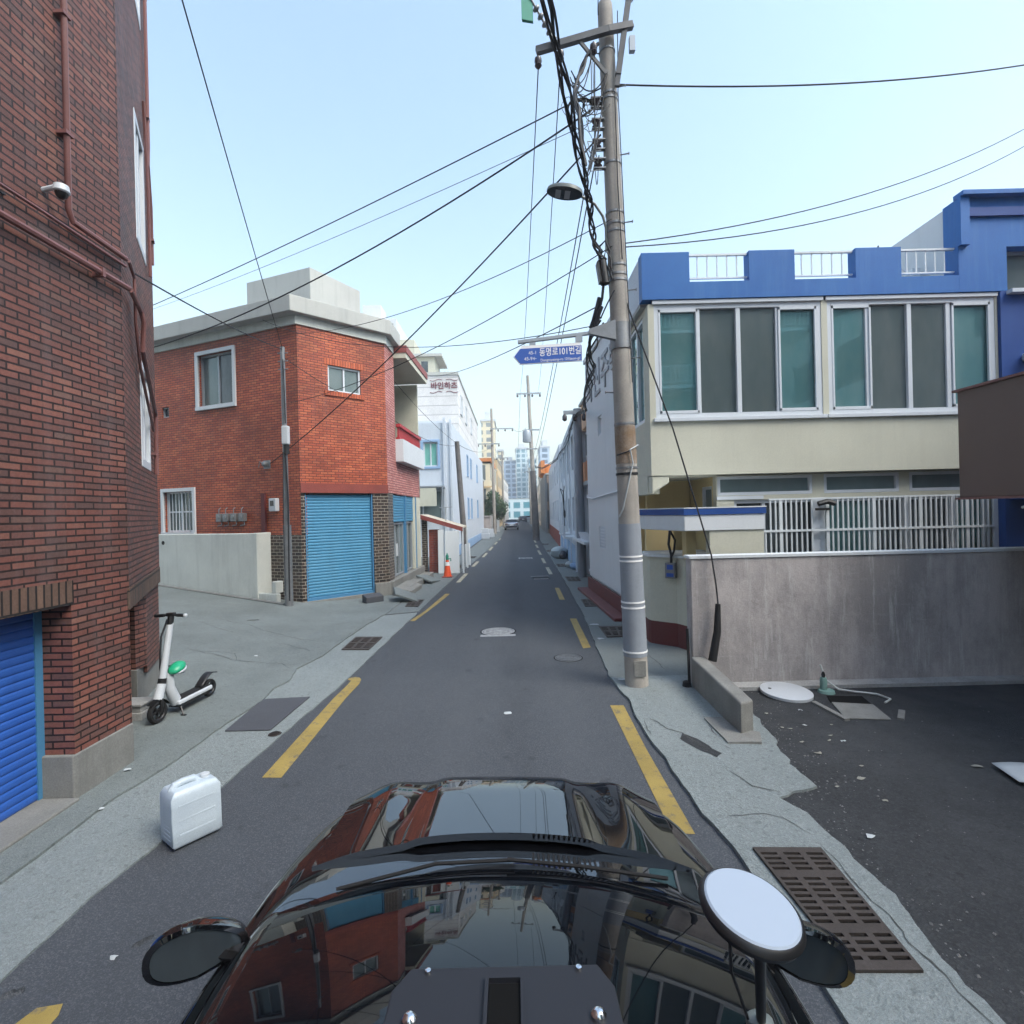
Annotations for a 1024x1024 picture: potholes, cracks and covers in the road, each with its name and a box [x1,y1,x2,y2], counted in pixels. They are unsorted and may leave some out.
drain grate [599,626,623,638]
crack [196,620,314,667]
crack [644,718,780,792]
drain grate [753,847,924,973]
manhole cover [480,627,516,637]
manhole cover [554,654,583,662]
drain grate [341,637,382,650]
